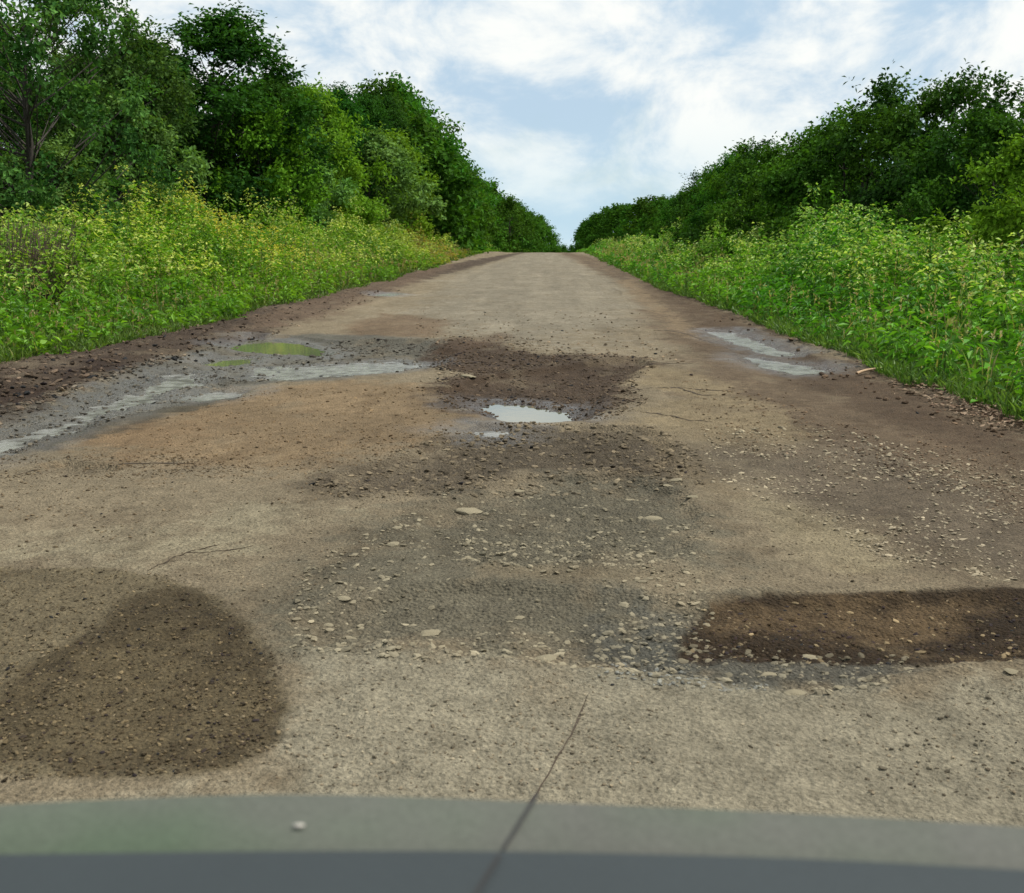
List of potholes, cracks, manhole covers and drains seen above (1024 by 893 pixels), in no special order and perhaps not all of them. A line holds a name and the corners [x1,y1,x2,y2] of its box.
pothole [439,357,654,421]
pothole [397,472,716,573]
pothole [319,419,686,495]
crack [147,544,253,571]
pothole [181,332,461,382]
pothole [0,368,236,458]
pothole [701,327,836,375]
